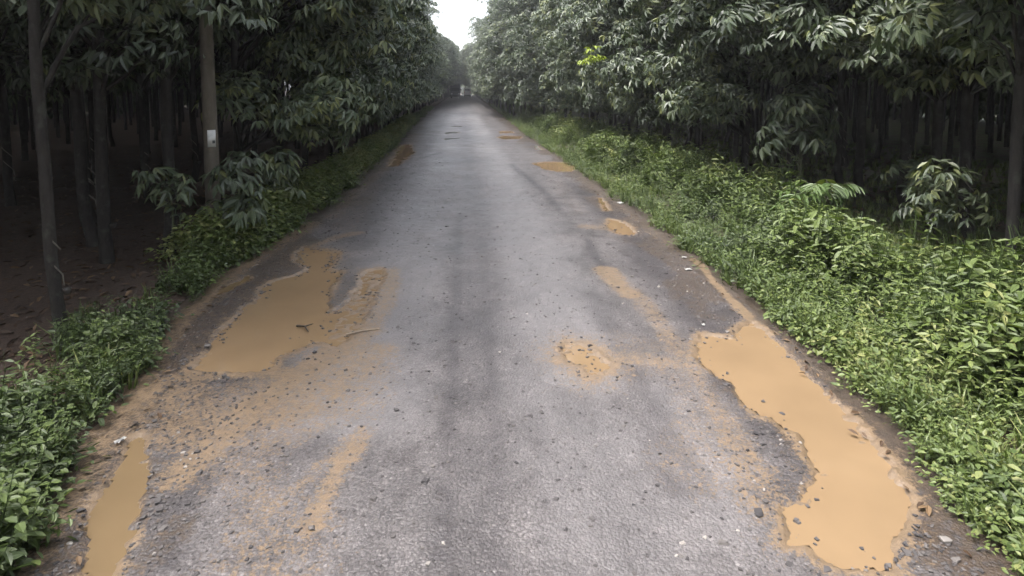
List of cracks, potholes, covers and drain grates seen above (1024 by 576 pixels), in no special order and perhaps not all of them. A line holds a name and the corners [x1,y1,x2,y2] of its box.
pothole [528,161,579,172]
pothole [603,218,641,236]
pothole [685,317,935,576]
pothole [553,338,623,382]
pothole [182,244,394,377]
pothole [594,197,614,212]
pothole [381,143,419,168]
pothole [63,428,173,576]
